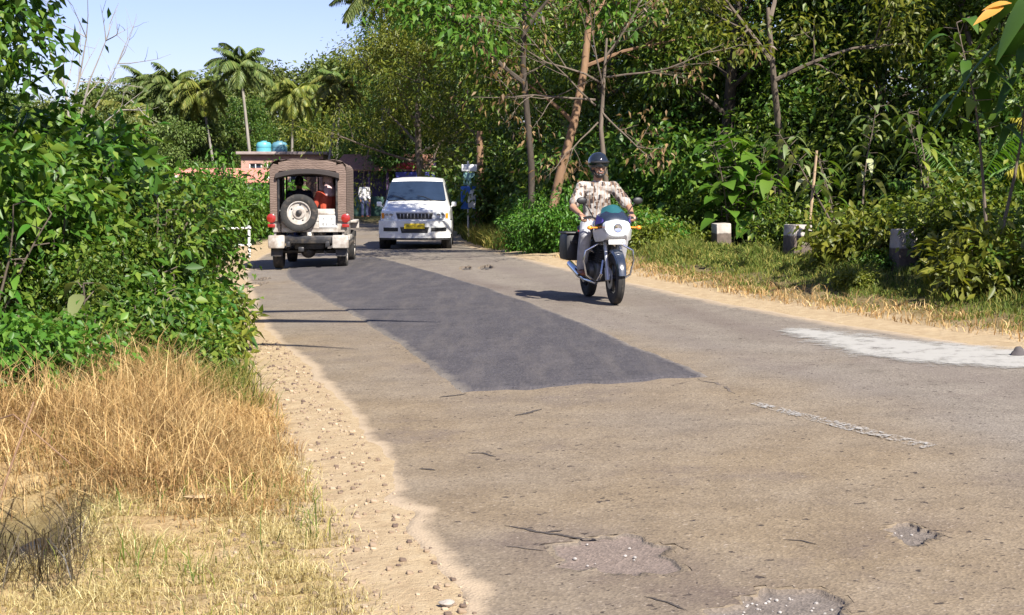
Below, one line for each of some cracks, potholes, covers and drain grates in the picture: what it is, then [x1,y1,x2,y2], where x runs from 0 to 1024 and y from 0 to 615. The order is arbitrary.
crack [505,525,596,550]
pothole [699,585,854,615]
pothole [542,533,692,578]
pothole [878,522,948,547]
